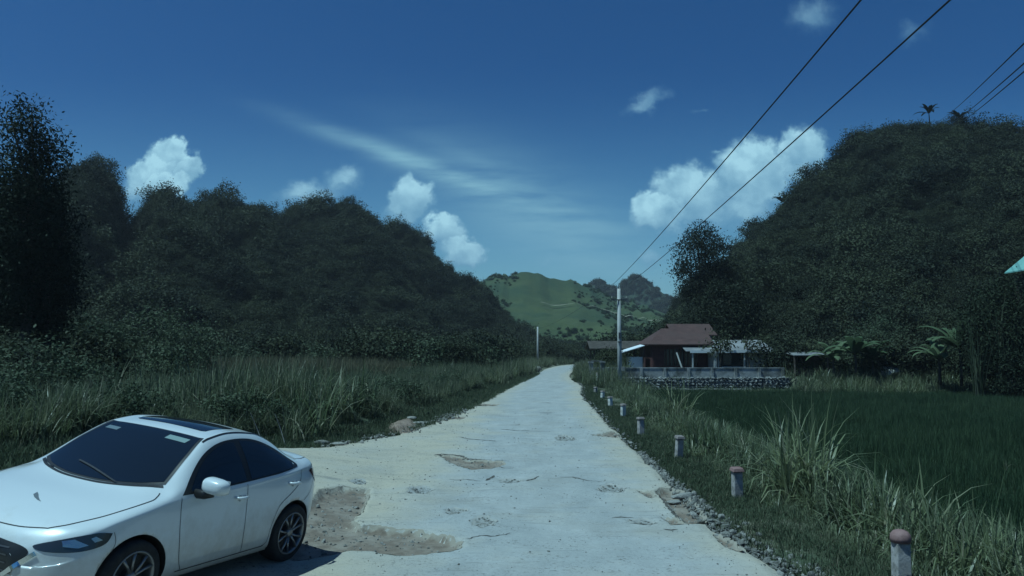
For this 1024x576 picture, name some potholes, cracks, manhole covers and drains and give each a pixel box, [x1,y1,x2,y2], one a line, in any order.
pothole [655,487,707,524]
pothole [597,483,627,493]
pothole [439,455,506,470]
pothole [289,485,463,561]
pothole [472,515,498,528]
